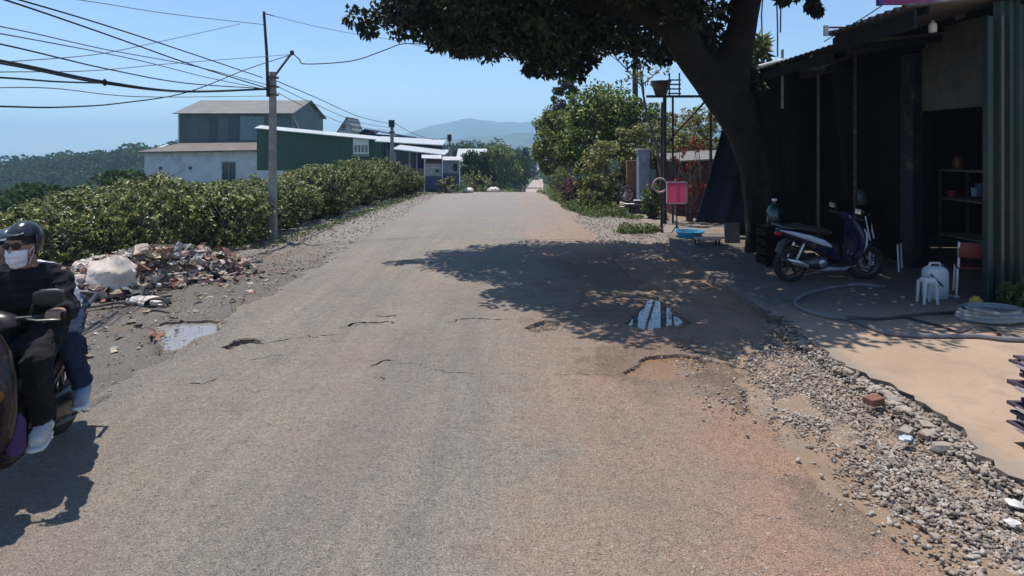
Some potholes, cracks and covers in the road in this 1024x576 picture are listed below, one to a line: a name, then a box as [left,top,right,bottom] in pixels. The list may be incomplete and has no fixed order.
pothole [519,320,567,335]
pothole [620,299,688,332]
pothole [215,337,269,353]
crack [367,358,614,381]
pothole [152,319,227,356]
crack [185,377,224,387]
crack [243,315,400,362]
pothole [616,353,715,385]
